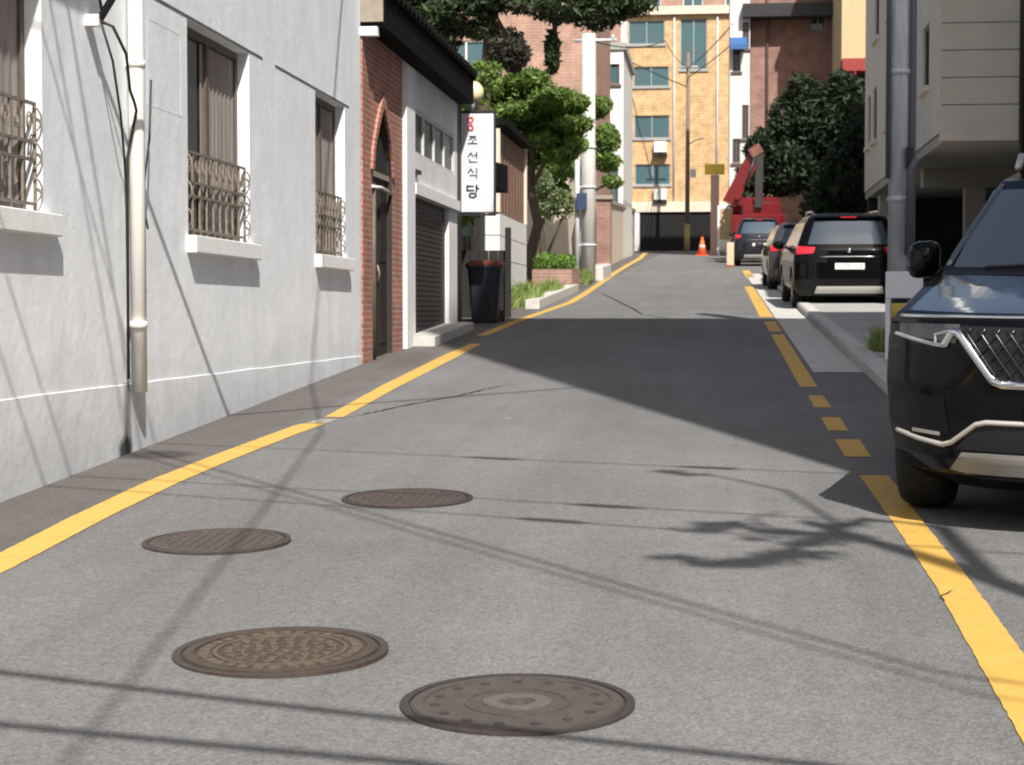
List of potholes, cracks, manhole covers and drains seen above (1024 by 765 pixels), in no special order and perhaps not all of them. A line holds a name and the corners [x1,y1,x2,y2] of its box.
manhole cover [341,488,473,509]
manhole cover [141,528,291,555]
crack [339,384,511,419]
manhole cover [172,626,389,679]
manhole cover [399,673,635,737]
